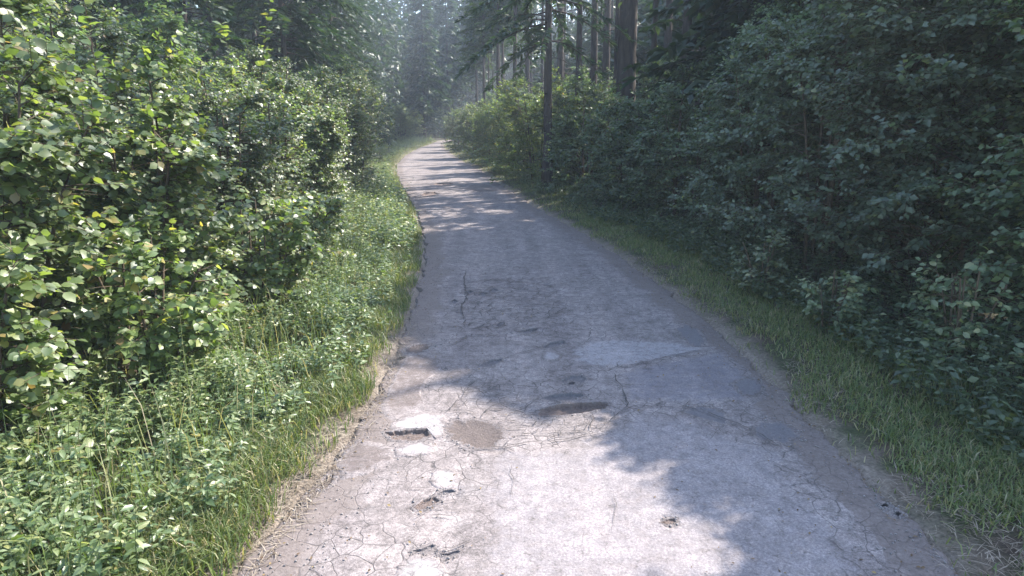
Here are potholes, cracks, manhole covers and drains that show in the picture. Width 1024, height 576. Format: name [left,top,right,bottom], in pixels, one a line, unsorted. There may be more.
pothole [434,549,464,559]
pothole [533,401,614,417]
pothole [381,428,434,443]
pothole [410,495,444,513]
crack [447,348,716,438]
crack [413,487,457,524]
pothole [407,543,439,555]
pothole [658,517,680,527]
pothole [443,417,511,452]
crack [453,272,570,339]
